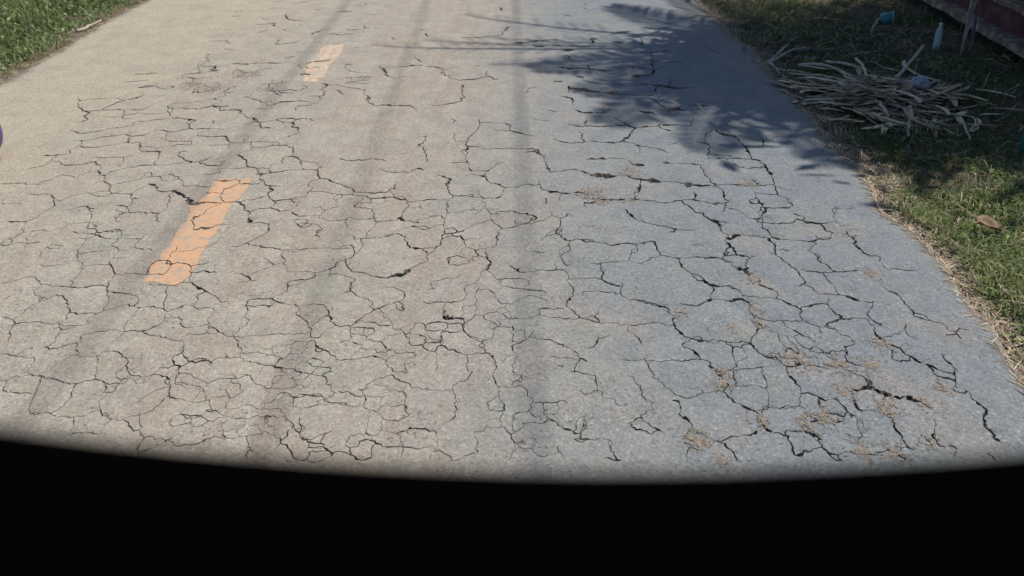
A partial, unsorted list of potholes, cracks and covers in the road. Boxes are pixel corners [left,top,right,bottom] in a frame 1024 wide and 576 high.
crack [0,2,1000,461]
